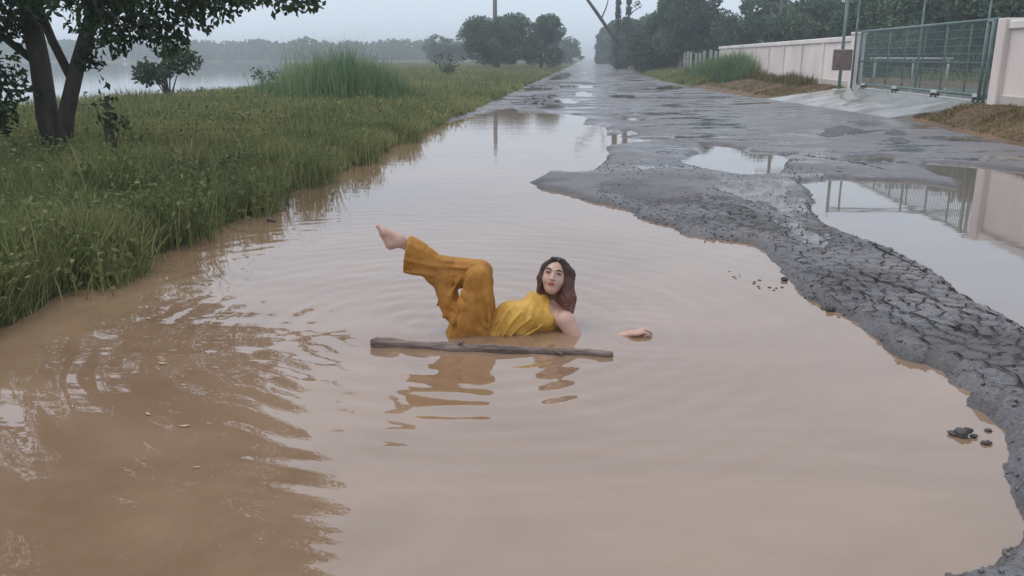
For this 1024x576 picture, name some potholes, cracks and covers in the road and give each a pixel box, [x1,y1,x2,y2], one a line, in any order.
pothole [799,163,1024,330]
crack [656,194,1024,403]
pothole [518,94,559,105]
pothole [549,72,572,80]
pothole [817,125,863,137]
pothole [681,145,788,175]
